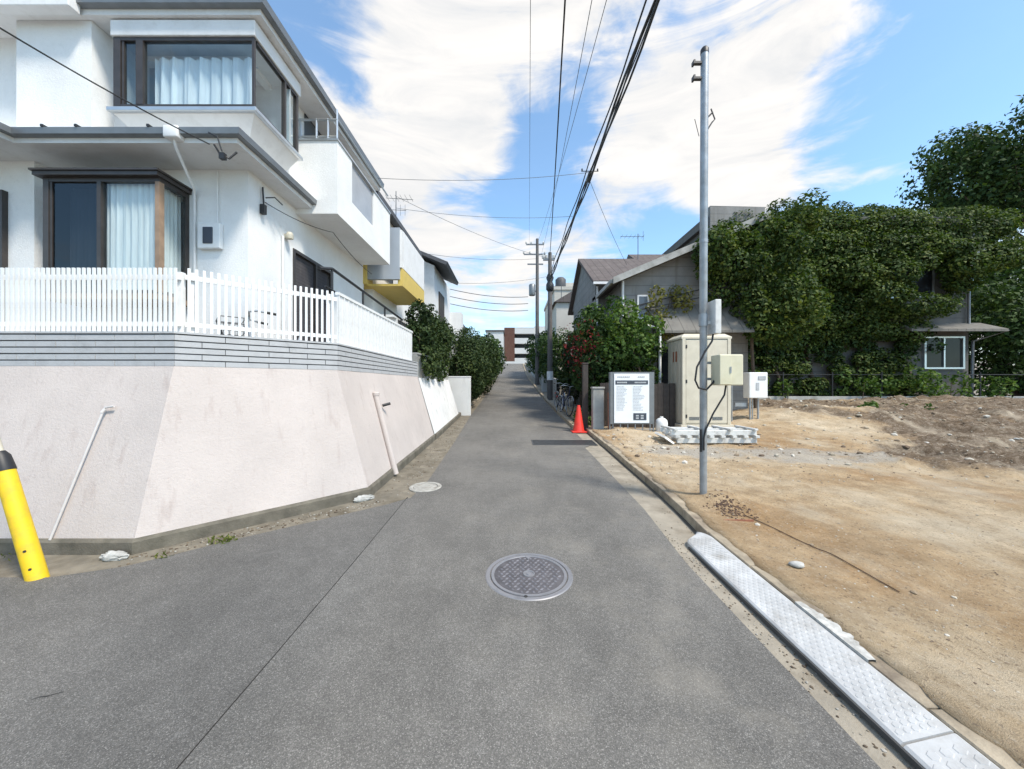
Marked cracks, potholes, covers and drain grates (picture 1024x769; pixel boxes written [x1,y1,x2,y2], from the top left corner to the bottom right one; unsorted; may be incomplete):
manhole cover [485,553,573,601]
manhole cover [409,482,442,493]
